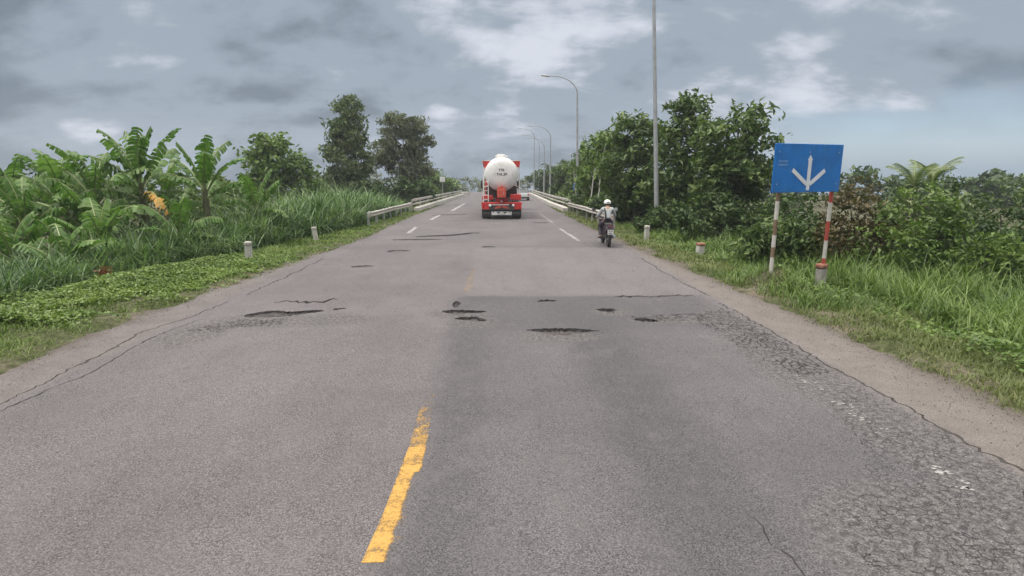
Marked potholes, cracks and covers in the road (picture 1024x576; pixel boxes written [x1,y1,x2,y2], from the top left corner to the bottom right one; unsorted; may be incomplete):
crack [617,294,829,376]
pothole [241,309,333,318]
crack [833,390,1024,576]
crack [752,516,805,576]
pothole [524,328,598,336]
crack [189,298,337,332]
